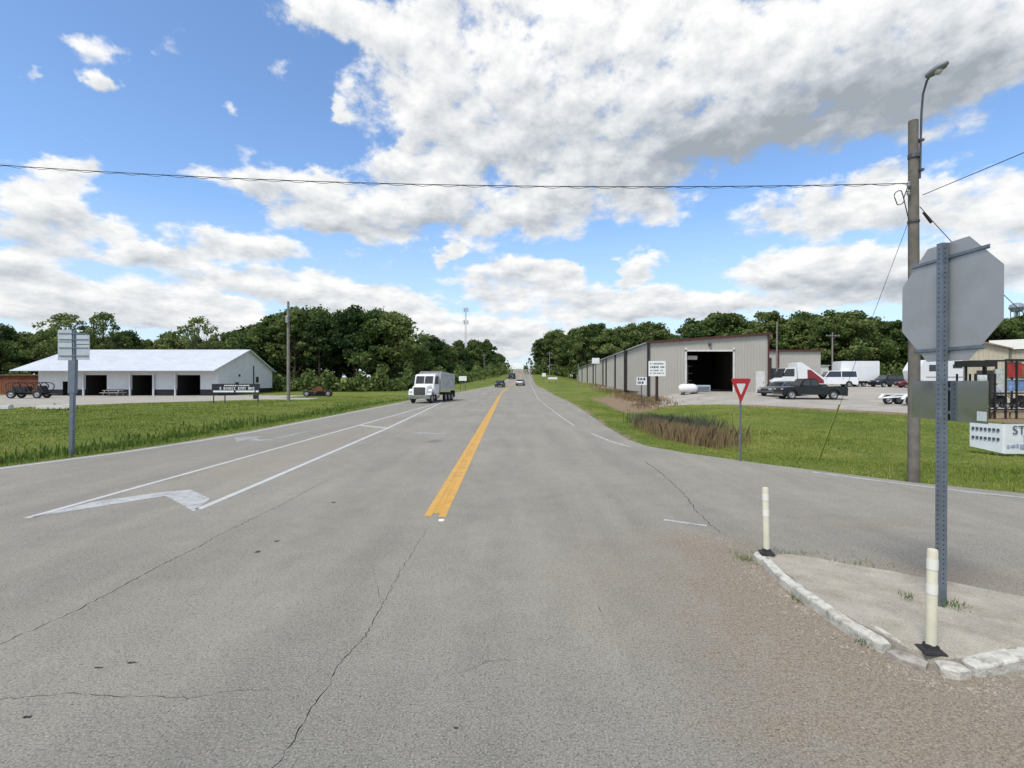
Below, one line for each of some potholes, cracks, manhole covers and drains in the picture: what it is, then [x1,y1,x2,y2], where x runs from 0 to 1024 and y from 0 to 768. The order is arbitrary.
crack [1,484,320,644]
crack [0,689,269,700]
